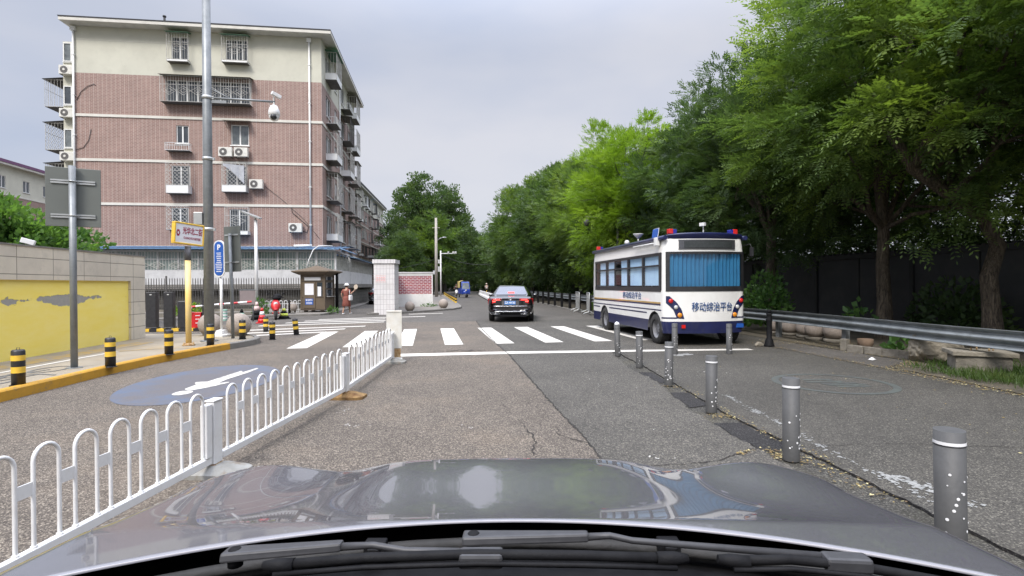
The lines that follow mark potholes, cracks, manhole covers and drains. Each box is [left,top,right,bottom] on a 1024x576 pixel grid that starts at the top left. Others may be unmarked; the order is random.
crack [434,321,602,459]
